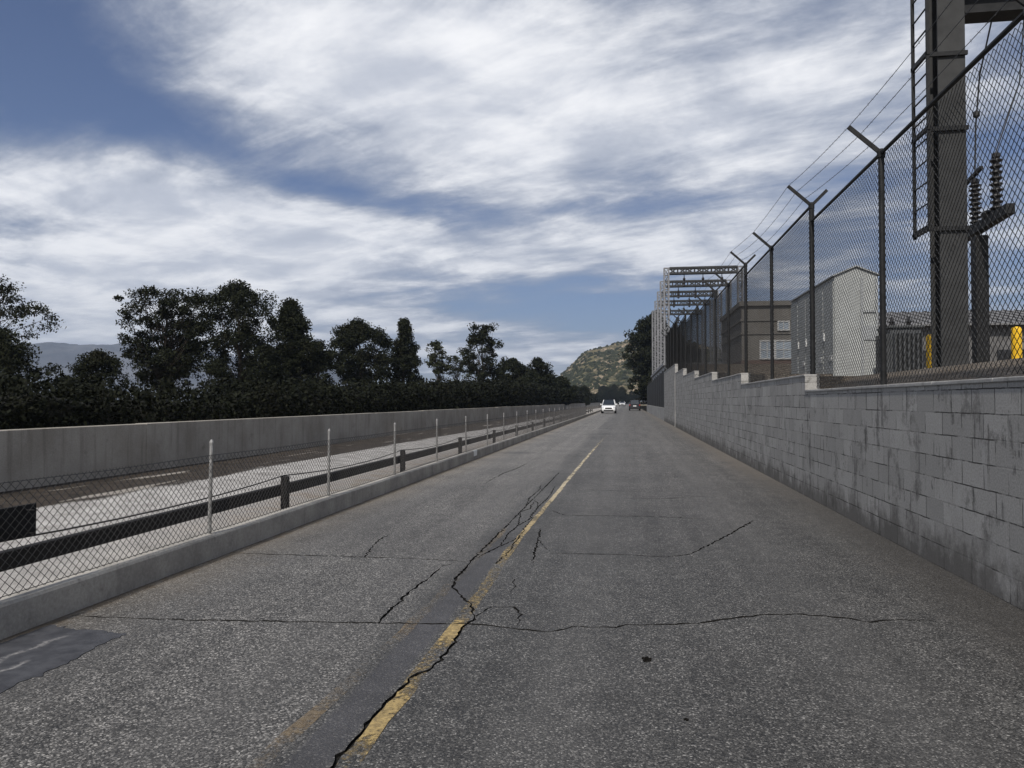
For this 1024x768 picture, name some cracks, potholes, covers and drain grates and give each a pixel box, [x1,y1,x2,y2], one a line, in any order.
crack [71,473,946,768]
